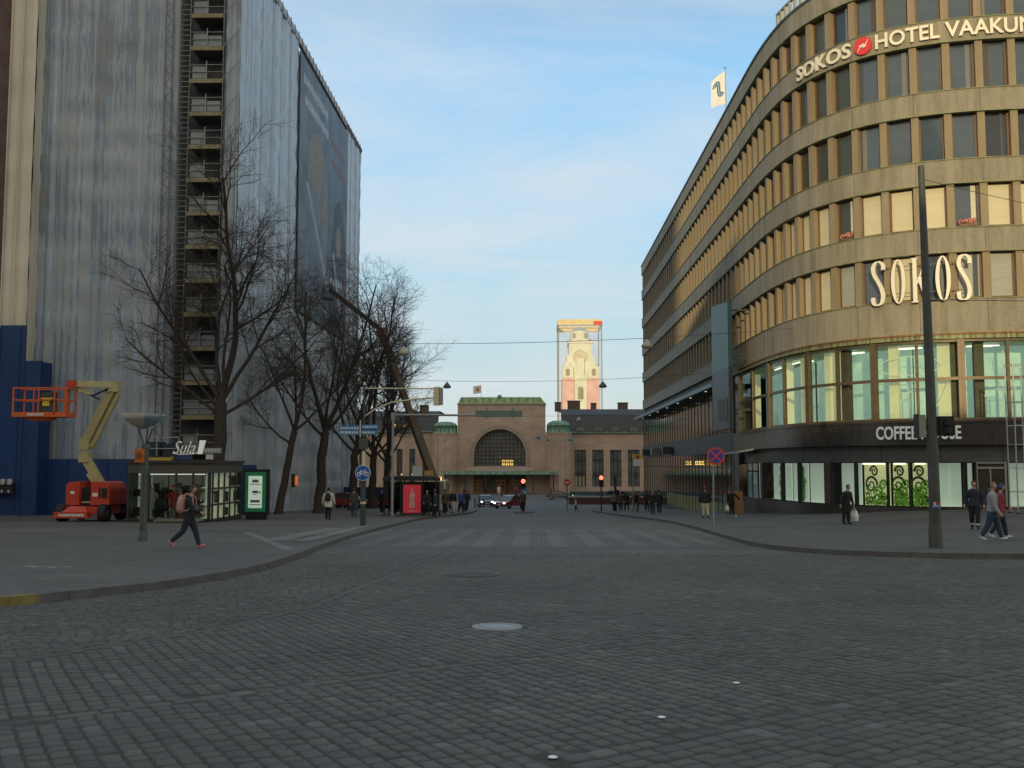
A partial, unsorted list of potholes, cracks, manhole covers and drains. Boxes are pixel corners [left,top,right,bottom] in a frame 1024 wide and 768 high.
manhole cover [472,623,523,631]
